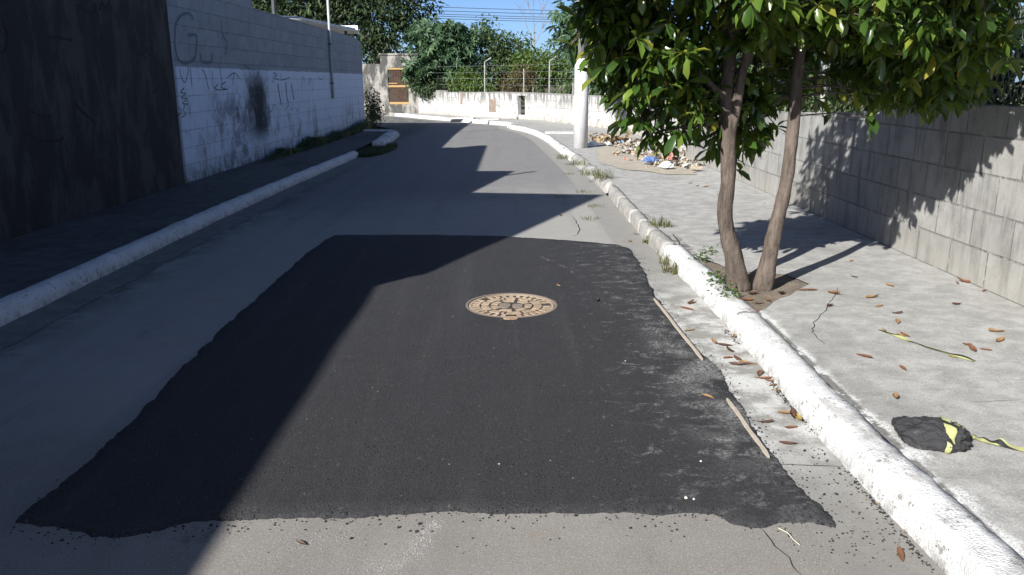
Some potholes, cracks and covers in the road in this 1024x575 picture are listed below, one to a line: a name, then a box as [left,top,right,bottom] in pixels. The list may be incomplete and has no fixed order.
crack [760,528,802,575]
manhole cover [466,293,557,320]
